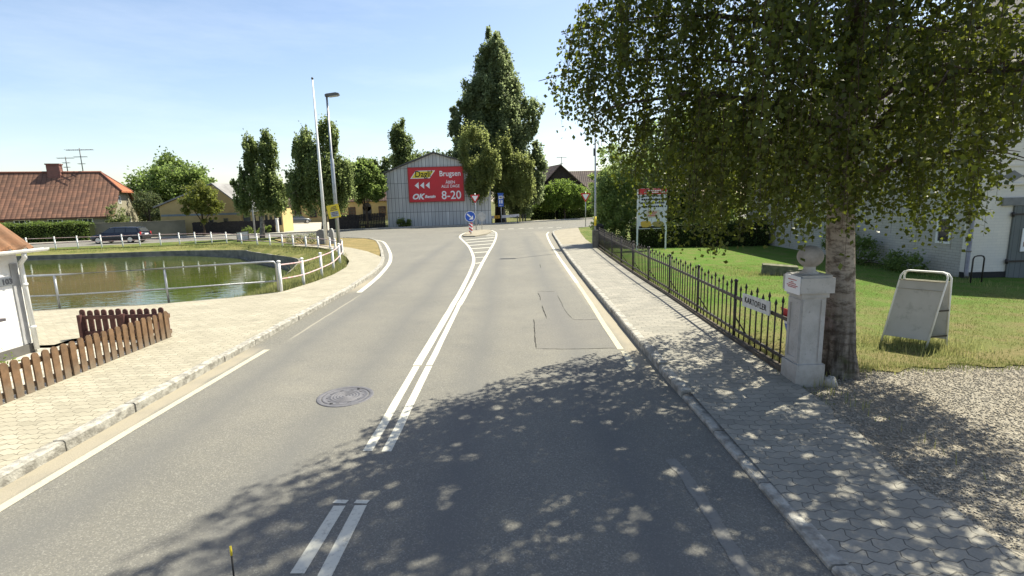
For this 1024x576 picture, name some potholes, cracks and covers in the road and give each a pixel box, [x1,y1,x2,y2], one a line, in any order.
manhole cover [316,386,374,407]
